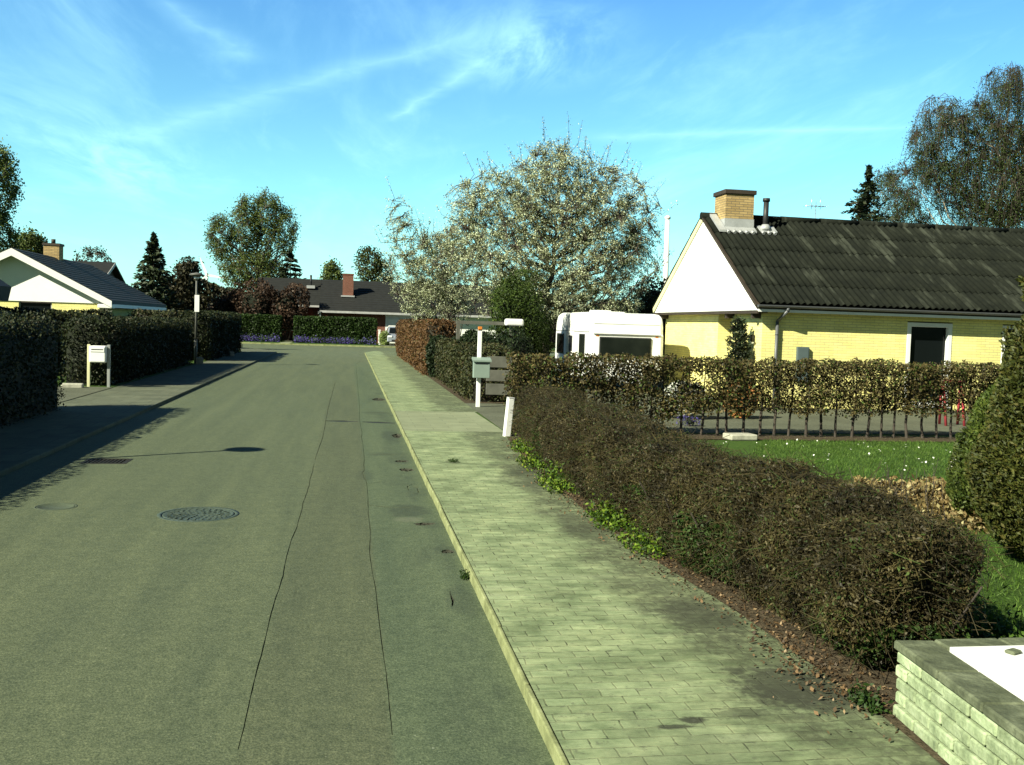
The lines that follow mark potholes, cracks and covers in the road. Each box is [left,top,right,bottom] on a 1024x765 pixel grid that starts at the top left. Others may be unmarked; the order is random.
crack [356,372,419,735]
manhole cover [157,507,239,522]
crack [238,385,335,750]
